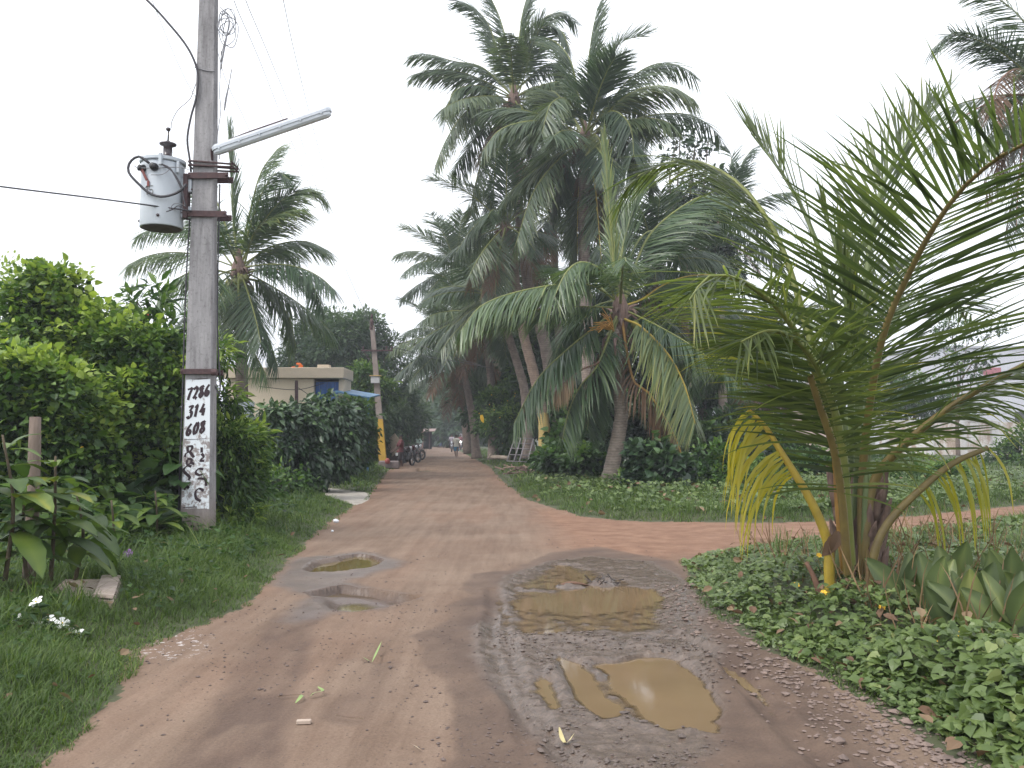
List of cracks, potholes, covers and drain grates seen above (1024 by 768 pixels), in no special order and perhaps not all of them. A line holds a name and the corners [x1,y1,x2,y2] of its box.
pothole [495,562,676,636]
pothole [524,650,729,733]
pothole [718,664,779,717]
pothole [303,585,415,612]
pothole [302,554,384,572]
